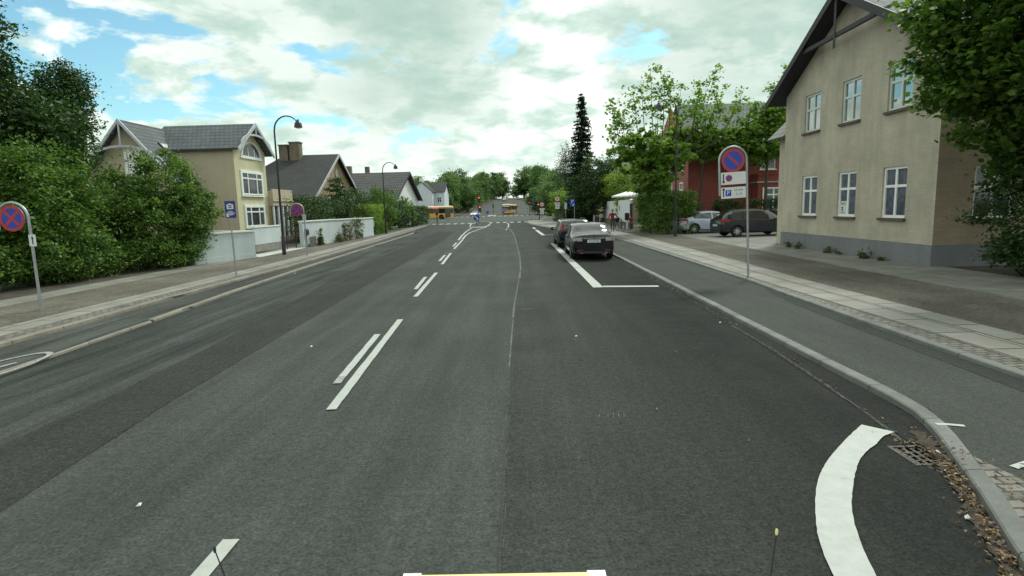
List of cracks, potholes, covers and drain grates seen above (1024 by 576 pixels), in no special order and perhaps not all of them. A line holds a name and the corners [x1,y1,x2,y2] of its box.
drain grate [887,445,946,466]
